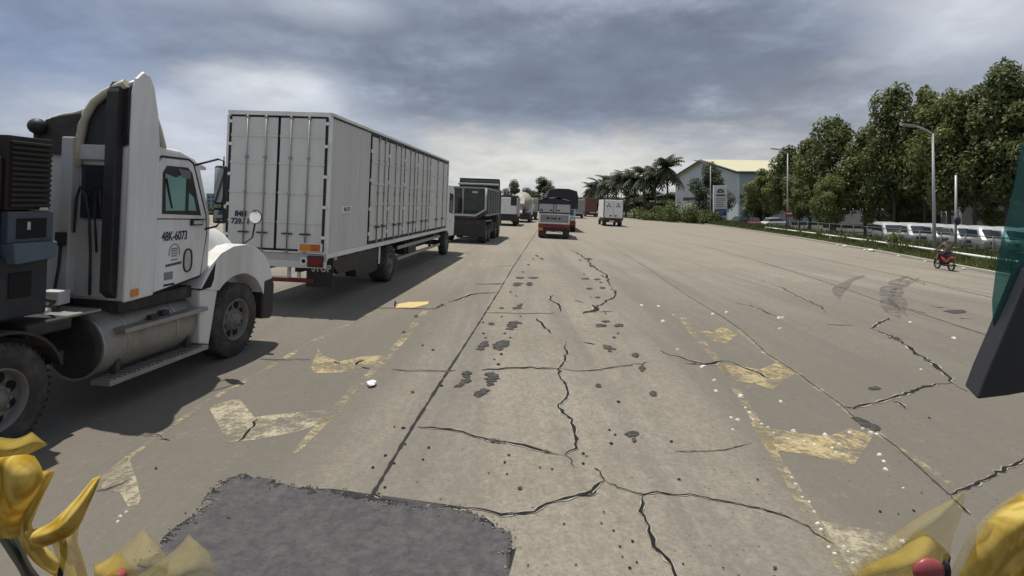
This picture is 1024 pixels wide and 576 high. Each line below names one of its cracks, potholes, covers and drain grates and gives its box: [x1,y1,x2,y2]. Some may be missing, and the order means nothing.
crack [393,250,834,576]
pothole [483,371,499,386]
crack [238,419,258,441]
crack [844,306,970,409]
pothole [492,340,510,350]
pothole [454,370,472,387]
crack [949,458,1024,514]
